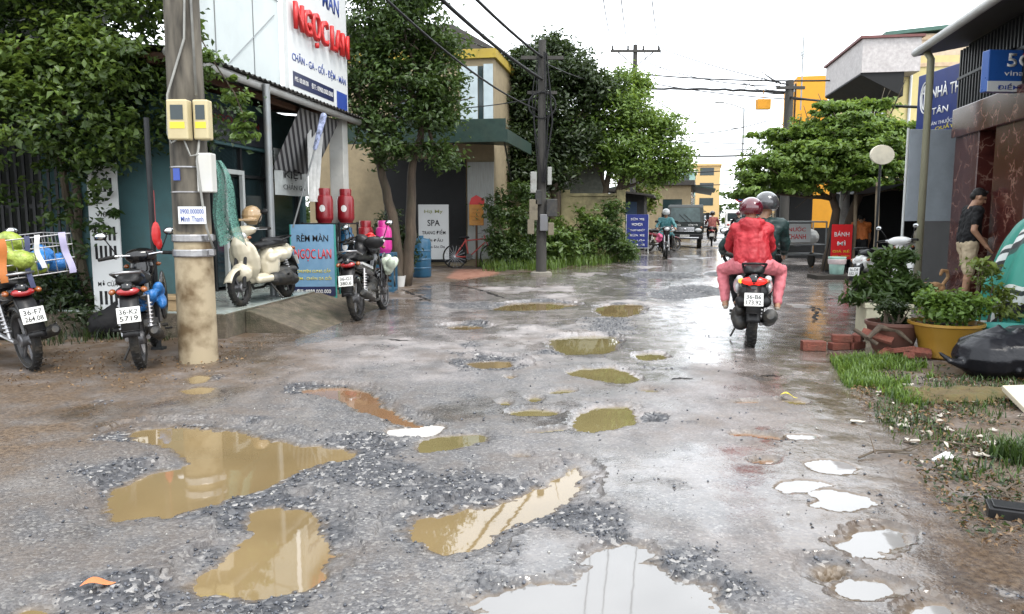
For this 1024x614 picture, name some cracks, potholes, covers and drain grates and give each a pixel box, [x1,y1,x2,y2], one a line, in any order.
pothole [72,414,391,528]
pothole [456,532,748,614]
pothole [543,332,627,355]
pothole [505,405,567,416]
pothole [565,401,646,433]
pothole [141,488,368,614]
pothole [821,519,920,559]
pothole [288,380,438,428]
pothole [485,299,586,311]
pothole [591,302,649,317]
pothole [564,364,645,384]
pothole [445,352,537,370]
